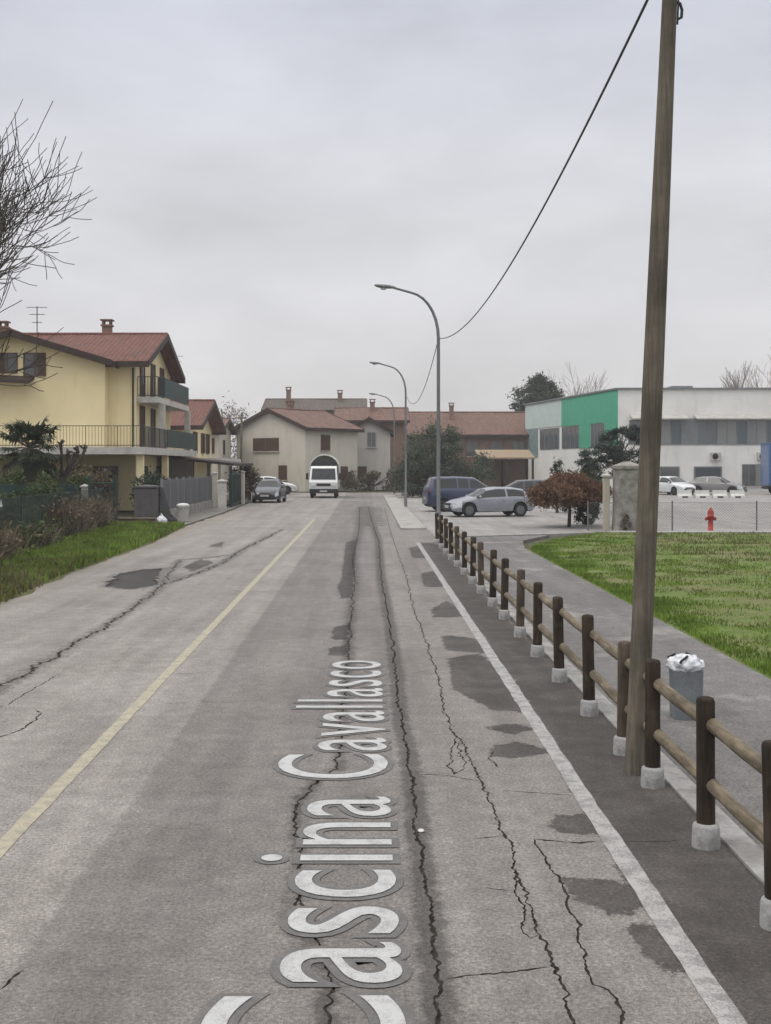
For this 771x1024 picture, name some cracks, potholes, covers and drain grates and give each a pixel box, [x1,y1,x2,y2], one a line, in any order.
crack [368,507,626,1024]
crack [0,529,283,737]
